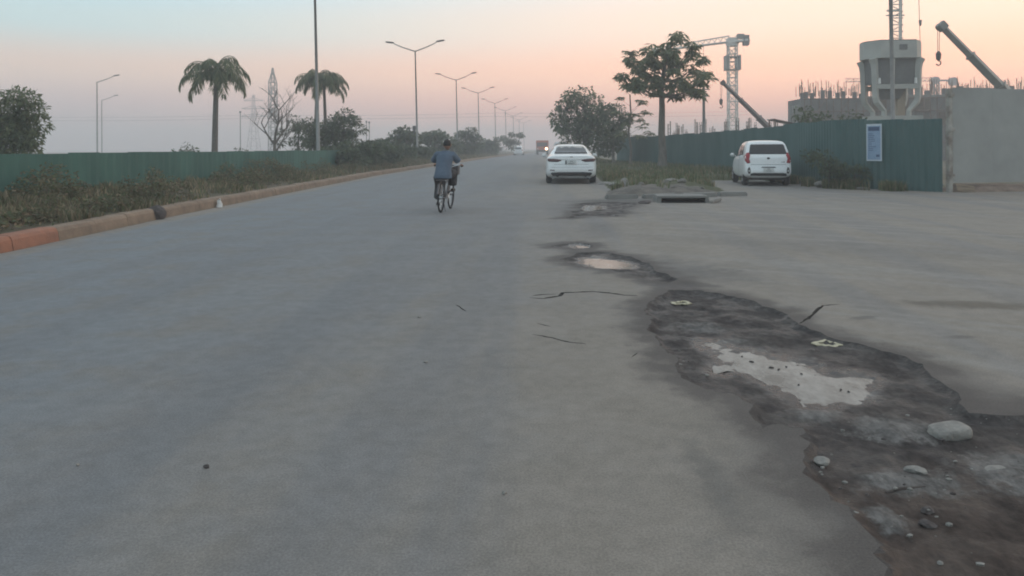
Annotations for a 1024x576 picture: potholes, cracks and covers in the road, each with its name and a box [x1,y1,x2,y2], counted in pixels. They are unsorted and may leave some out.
pothole [568,202,636,218]
pothole [559,251,678,283]
drain grate [653,194,709,203]
crack [533,291,637,299]
crack [800,304,837,323]
pothole [644,290,1024,576]
